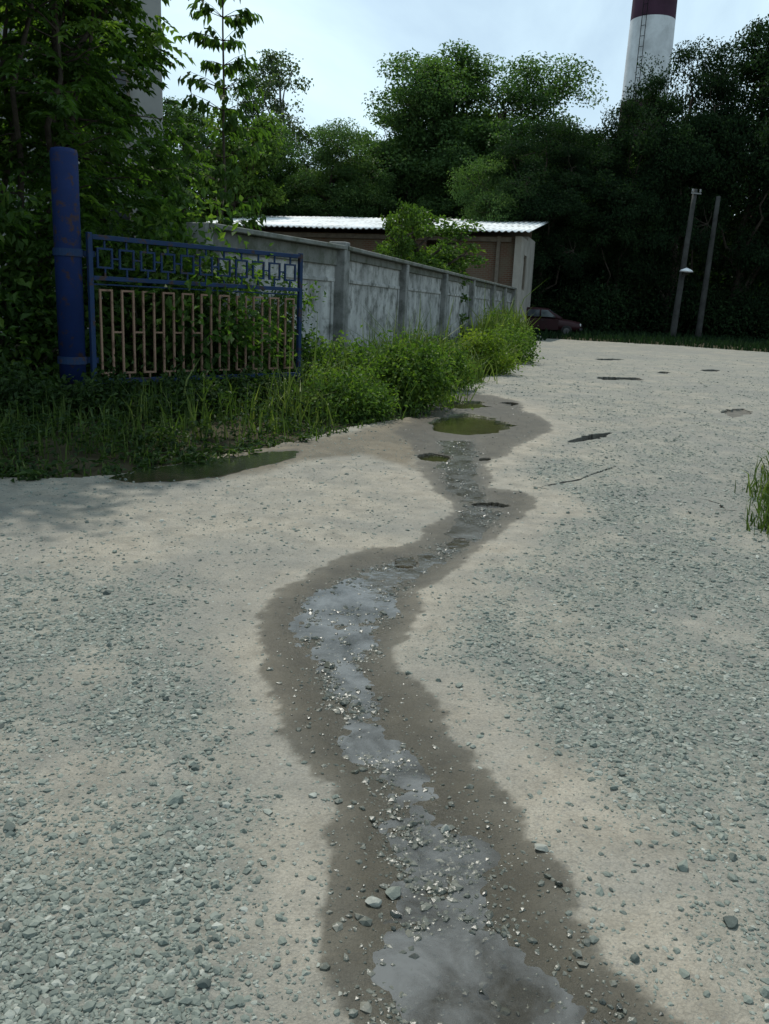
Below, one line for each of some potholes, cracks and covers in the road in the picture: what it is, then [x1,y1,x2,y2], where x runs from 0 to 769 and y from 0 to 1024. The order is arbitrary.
pothole [410,451,457,464]
crack [533,465,625,490]
pothole [460,501,519,510]
pothole [552,431,622,446]
pothole [419,411,527,438]
pothole [709,406,764,421]
